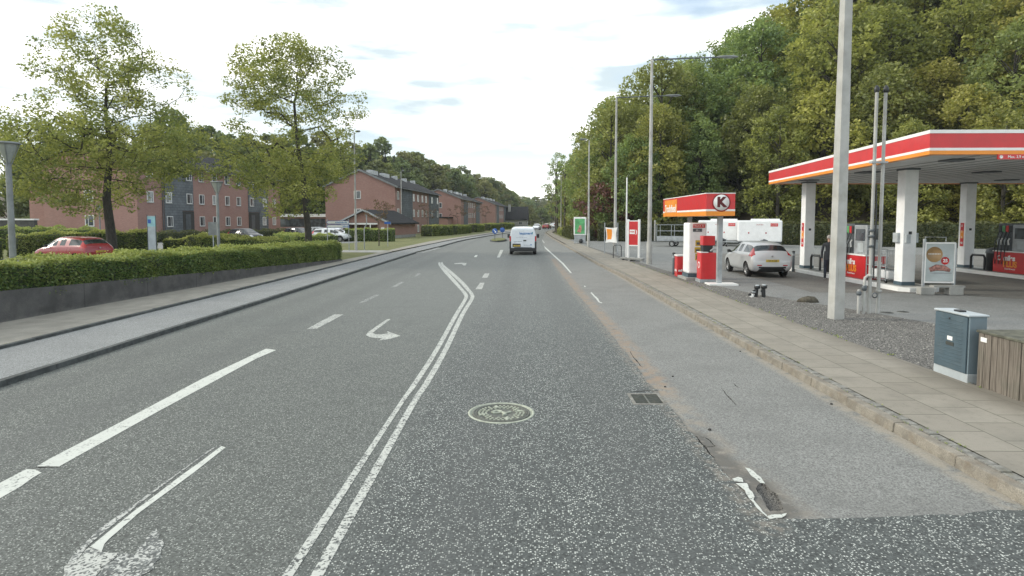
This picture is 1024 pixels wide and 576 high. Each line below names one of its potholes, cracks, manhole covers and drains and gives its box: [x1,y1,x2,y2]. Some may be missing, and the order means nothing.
drain grate [627,393,668,405]
pothole [756,483,783,511]
manhole cover [468,402,535,424]
